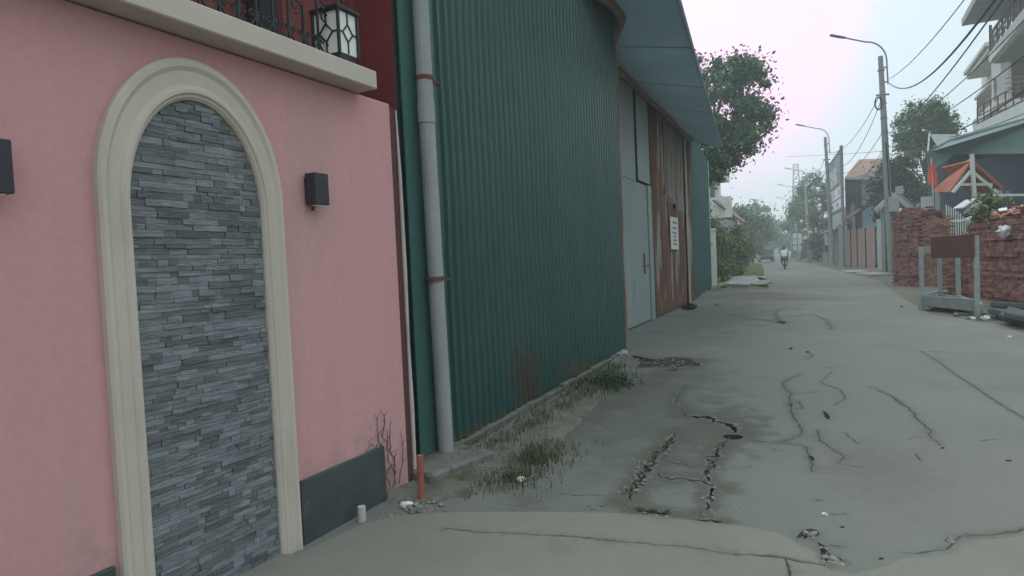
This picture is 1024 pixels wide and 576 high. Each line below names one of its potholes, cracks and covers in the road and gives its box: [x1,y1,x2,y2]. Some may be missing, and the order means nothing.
pothole [818,543,846,565]
crack [767,294,832,328]
crack [670,385,742,434]
crack [781,353,857,472]
pothole [797,529,819,542]
crack [872,387,941,461]
crack [903,528,1024,554]
pothole [632,356,700,368]
